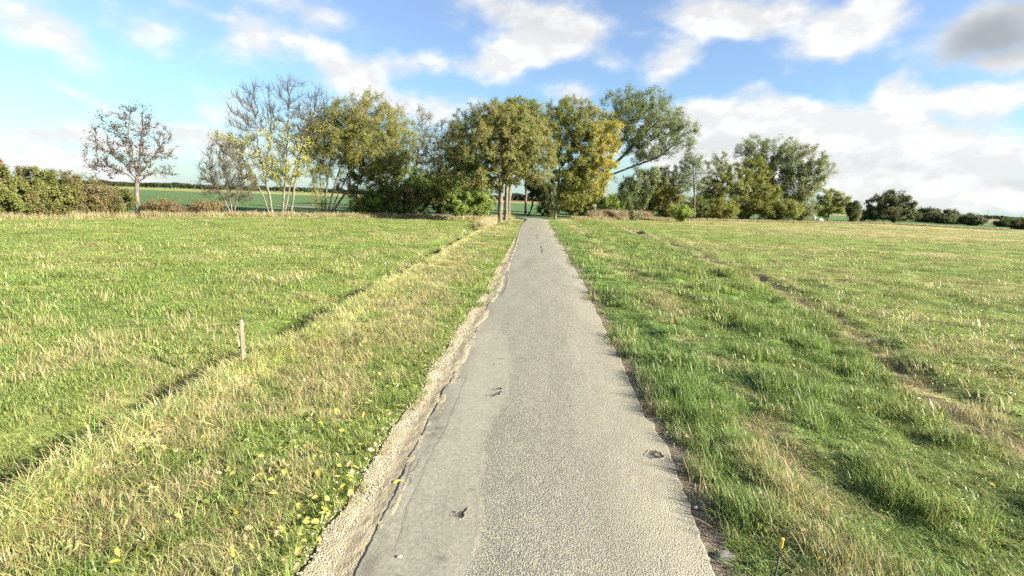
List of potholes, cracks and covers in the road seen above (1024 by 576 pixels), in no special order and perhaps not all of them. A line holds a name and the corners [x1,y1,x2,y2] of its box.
pothole [643,449,666,460]
pothole [450,506,469,520]
crack [394,380,466,552]
